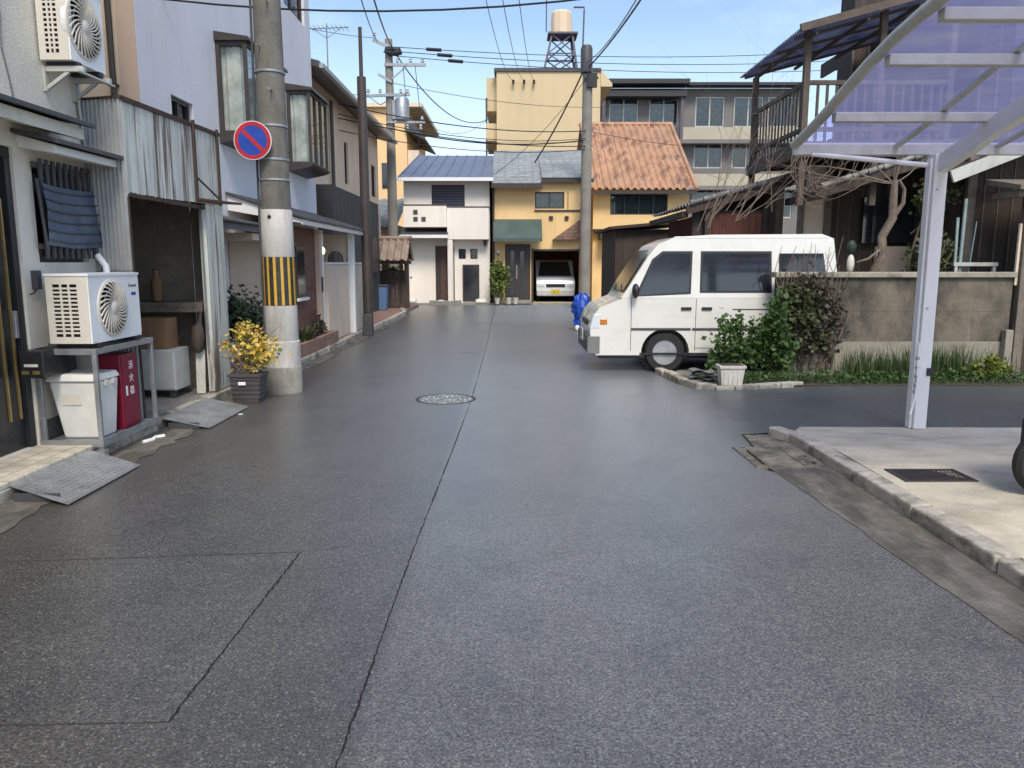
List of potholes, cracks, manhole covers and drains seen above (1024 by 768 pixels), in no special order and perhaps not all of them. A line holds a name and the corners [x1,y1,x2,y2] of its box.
drain grate [884,469,979,482]
manhole cover [415,394,476,405]
